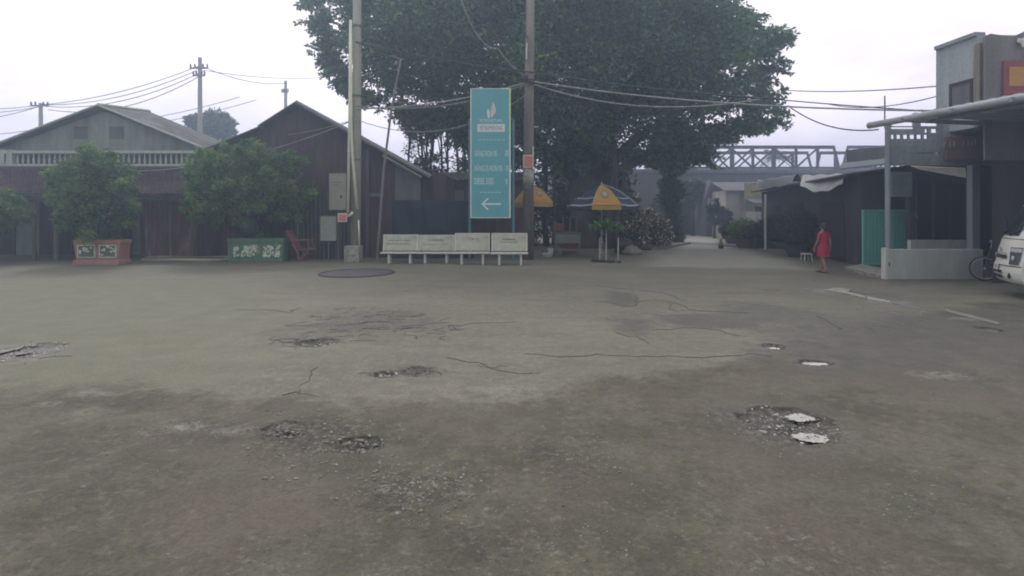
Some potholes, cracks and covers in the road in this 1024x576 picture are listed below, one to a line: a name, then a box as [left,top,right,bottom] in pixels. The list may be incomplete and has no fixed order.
crack [538,286,769,358]
pothole [222,420,313,450]
pothole [707,404,849,447]
pothole [291,337,343,348]
pothole [371,370,398,378]
pothole [398,365,437,377]
pothole [332,434,387,457]
crack [422,357,530,375]
manhole cover [318,268,396,278]
crack [270,308,505,349]
pothole [0,341,76,363]
